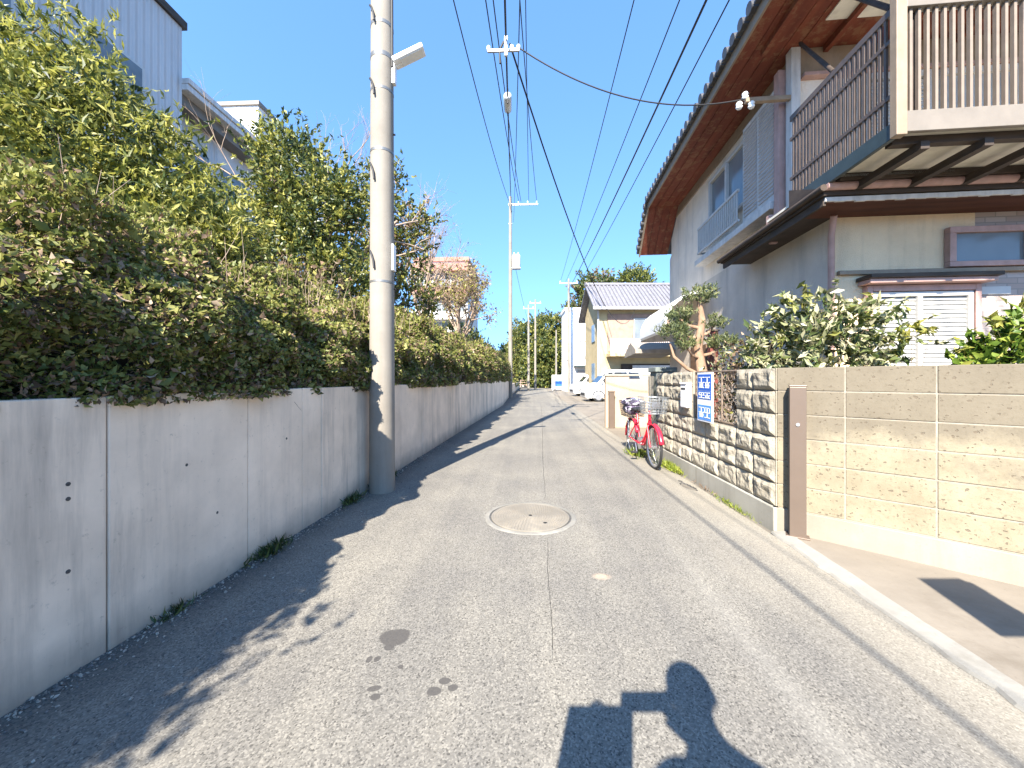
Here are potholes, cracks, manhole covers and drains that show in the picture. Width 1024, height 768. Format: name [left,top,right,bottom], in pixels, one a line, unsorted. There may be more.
crack [533,404,583,662]
manhole cover [485,502,576,535]
